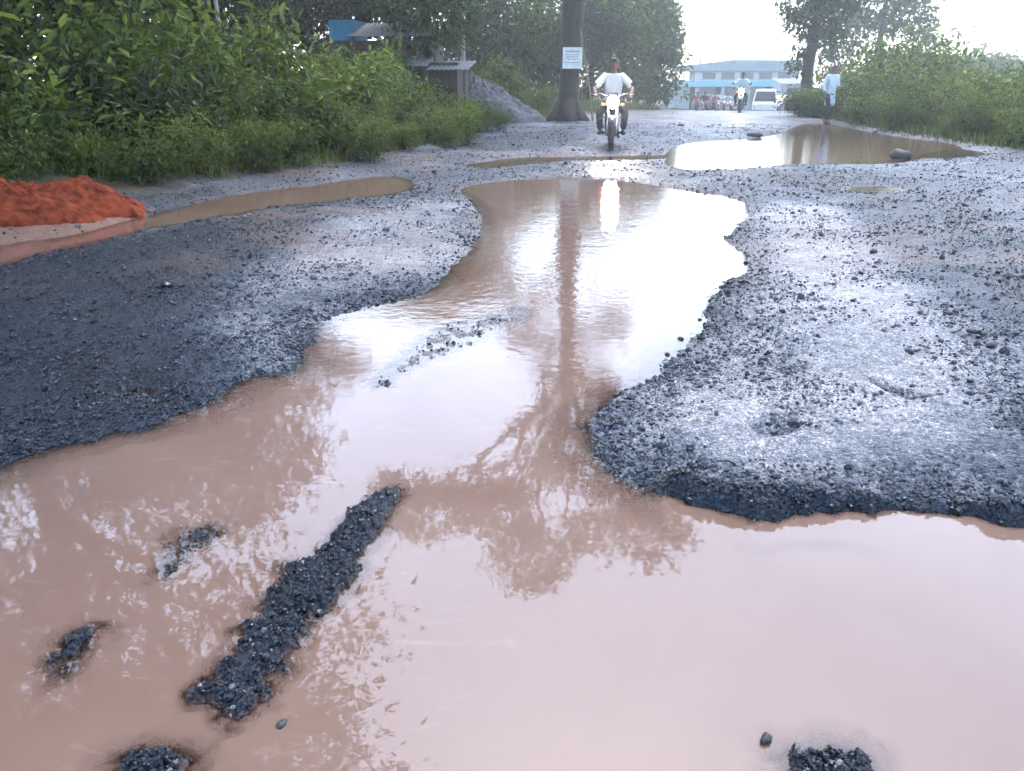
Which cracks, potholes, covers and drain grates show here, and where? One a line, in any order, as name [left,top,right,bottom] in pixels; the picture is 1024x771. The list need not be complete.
pothole [910,147,989,159]
pothole [0,176,1024,771]
pothole [661,120,965,170]
pothole [461,152,668,168]
